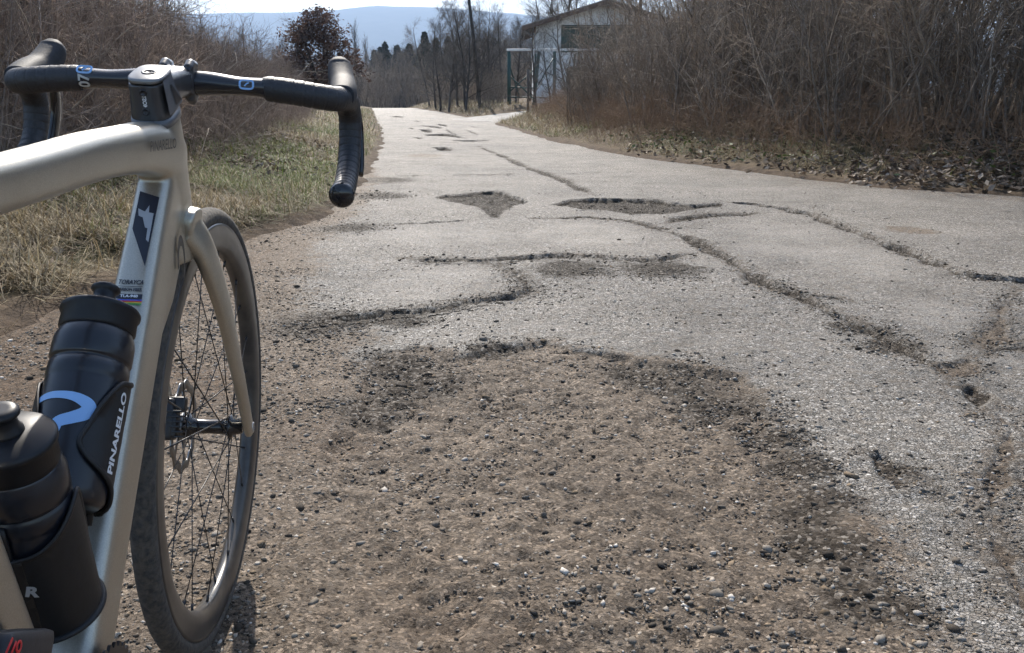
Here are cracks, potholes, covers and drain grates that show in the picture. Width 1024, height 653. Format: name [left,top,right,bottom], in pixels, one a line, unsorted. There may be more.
pothole [954,383,1002,416]
pothole [268,337,918,653]
pothole [549,198,727,215]
crack [530,201,1024,623]
pothole [433,191,531,219]
